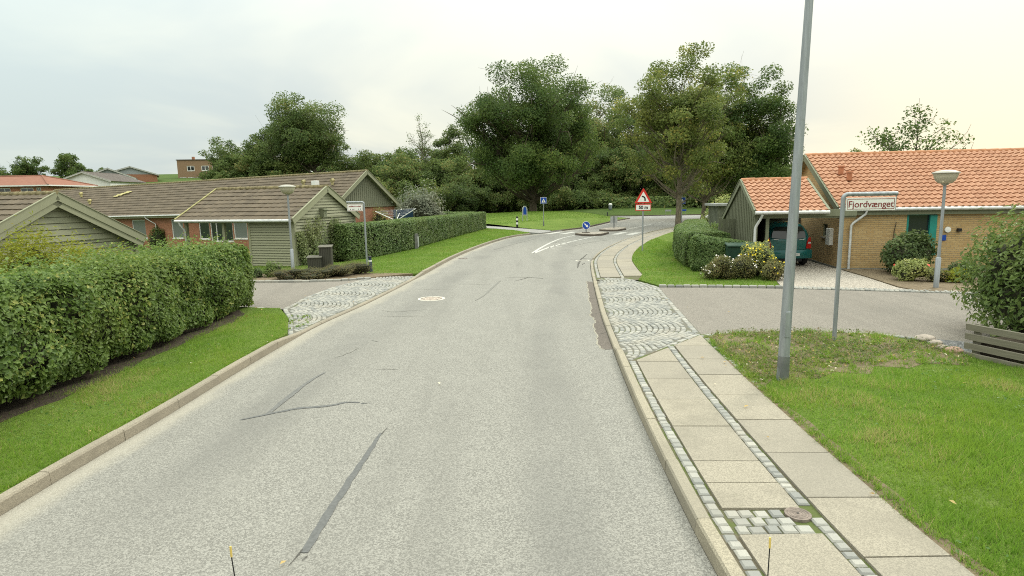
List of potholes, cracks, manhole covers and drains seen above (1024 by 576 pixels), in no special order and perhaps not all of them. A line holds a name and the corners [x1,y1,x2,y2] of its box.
utility cover [784,507,812,523]
